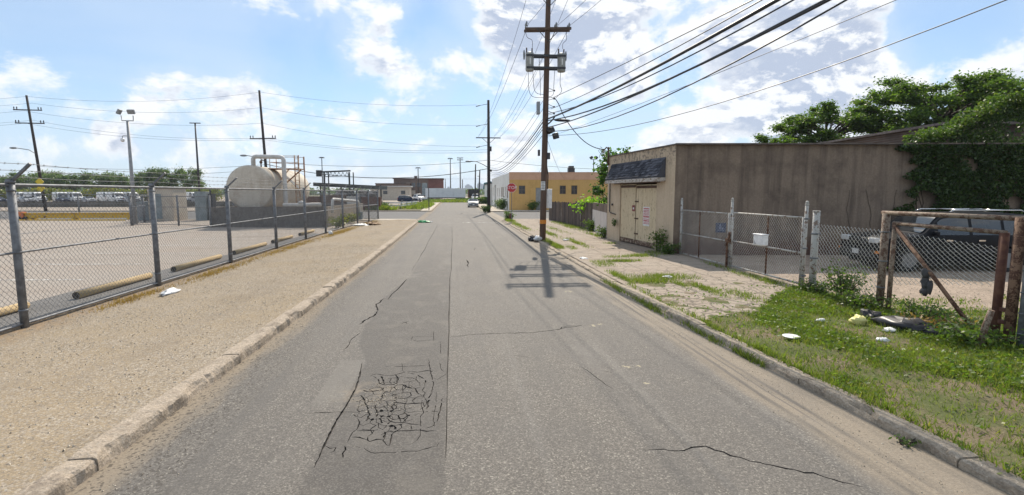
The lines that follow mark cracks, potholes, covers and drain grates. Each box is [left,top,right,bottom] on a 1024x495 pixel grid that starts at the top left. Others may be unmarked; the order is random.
crack [345,280,406,349]
crack [324,360,444,457]
crack [404,321,582,353]
crack [650,446,863,487]
